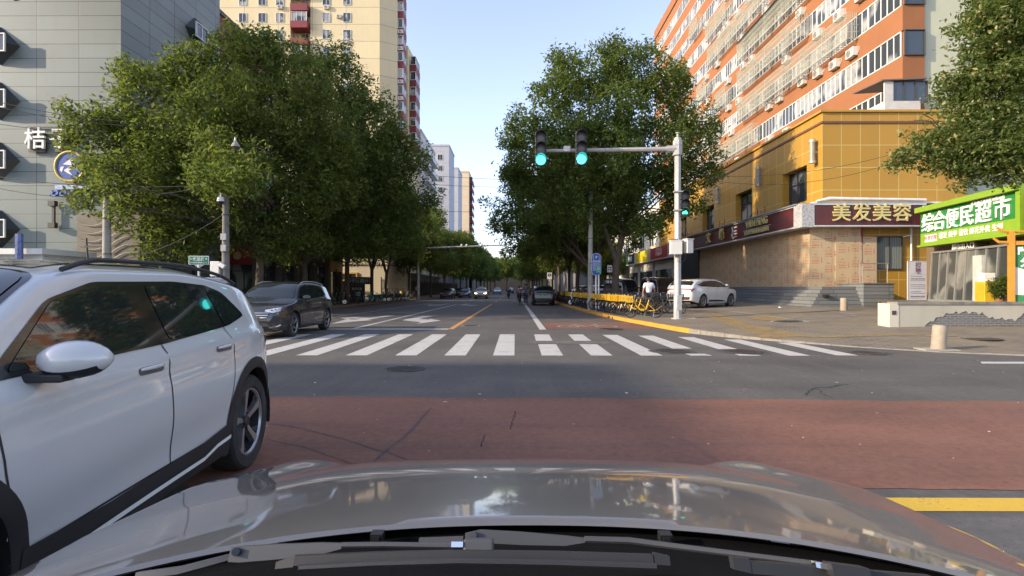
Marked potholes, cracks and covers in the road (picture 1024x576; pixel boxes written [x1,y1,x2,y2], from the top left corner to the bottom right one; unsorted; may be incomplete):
crack [267,422,408,464]
